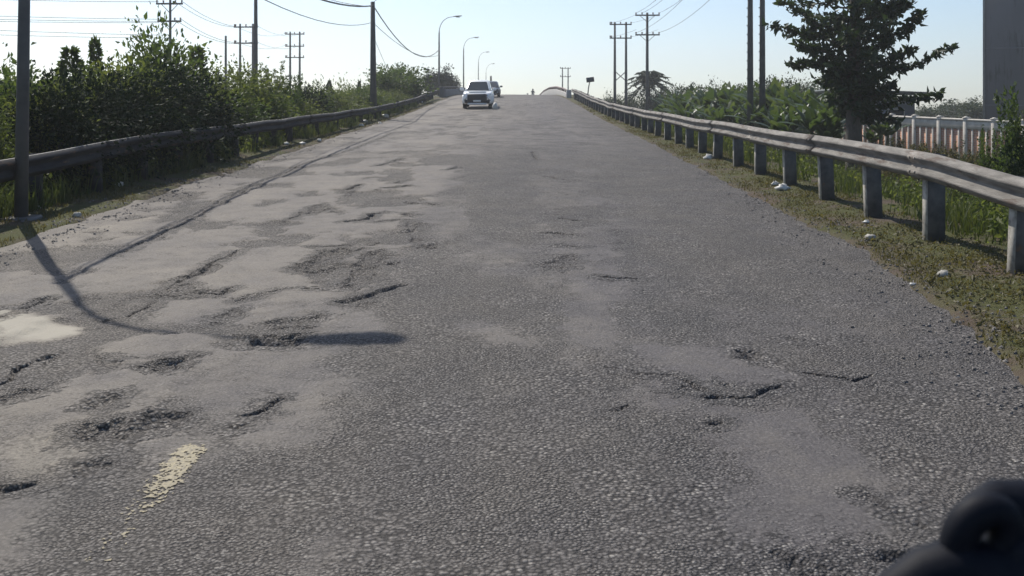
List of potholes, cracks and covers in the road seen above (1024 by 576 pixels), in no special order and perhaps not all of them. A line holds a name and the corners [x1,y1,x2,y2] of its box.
pothole [197,309,346,352]
pothole [119,349,215,376]
crack [585,361,893,433]
pothole [39,405,211,452]
crack [326,158,474,224]
pothole [327,247,399,294]
pothole [703,377,748,393]
